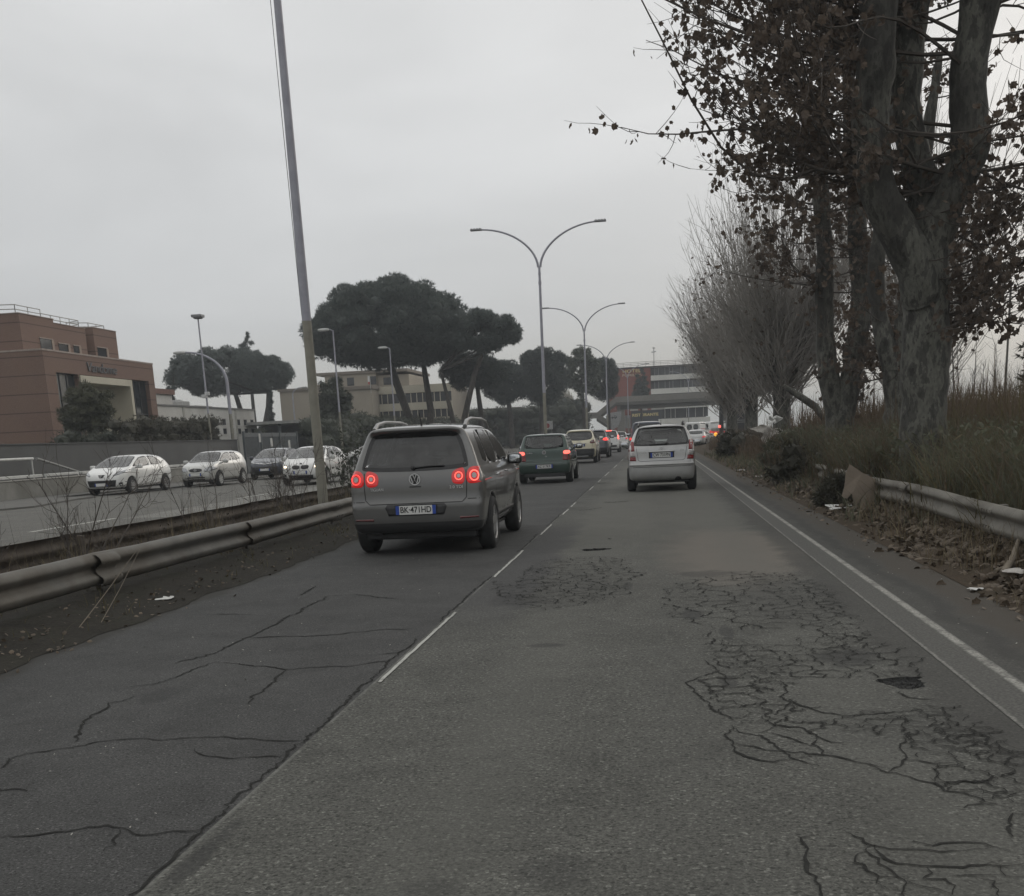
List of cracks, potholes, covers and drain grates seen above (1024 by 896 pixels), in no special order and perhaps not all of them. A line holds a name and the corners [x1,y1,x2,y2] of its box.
crack [1,586,417,895]
pothole [876,676,925,690]
crack [492,556,647,610]
crack [660,571,1024,896]
